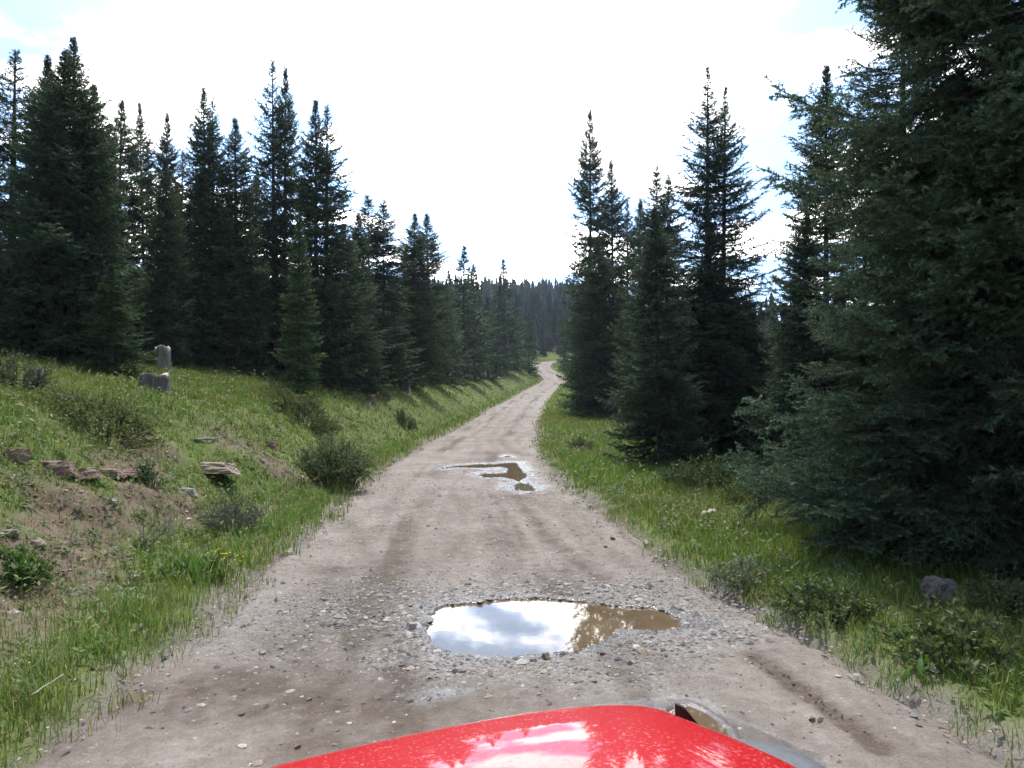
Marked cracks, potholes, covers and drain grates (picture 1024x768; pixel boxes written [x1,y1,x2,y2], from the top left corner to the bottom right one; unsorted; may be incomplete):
pothole [421,596,685,658]
pothole [441,462,539,491]
